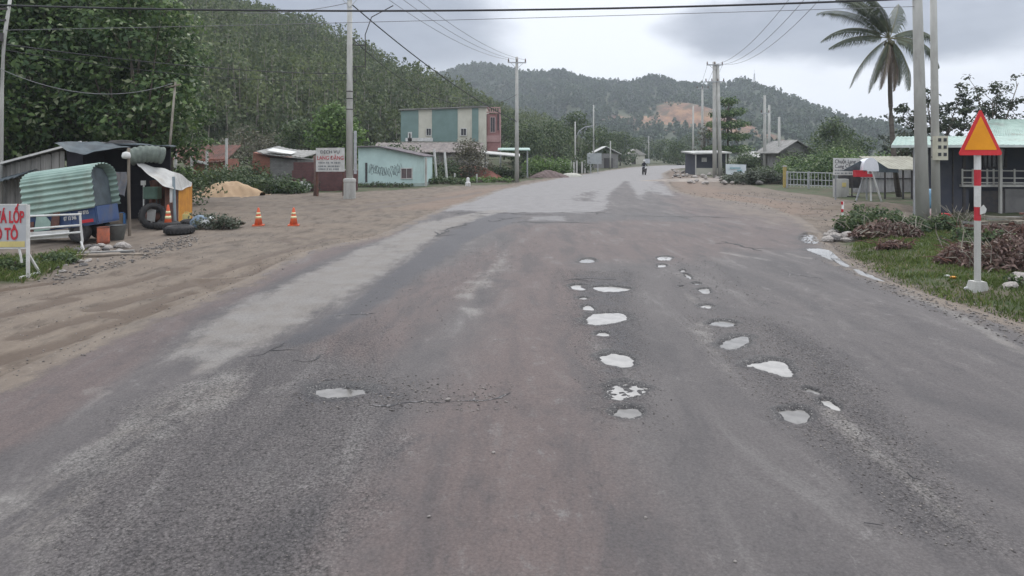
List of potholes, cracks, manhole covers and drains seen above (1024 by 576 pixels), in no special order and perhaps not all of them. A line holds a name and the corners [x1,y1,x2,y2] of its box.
pothole [700,318,745,329]
pothole [564,282,592,292]
pothole [602,402,653,422]
pothole [707,332,761,352]
pothole [732,354,805,380]
pothole [691,286,716,295]
pothole [588,348,643,370]
pothole [298,379,385,402]
pothole [572,310,641,327]
pothole [595,377,661,403]
pothole [581,283,637,293]
